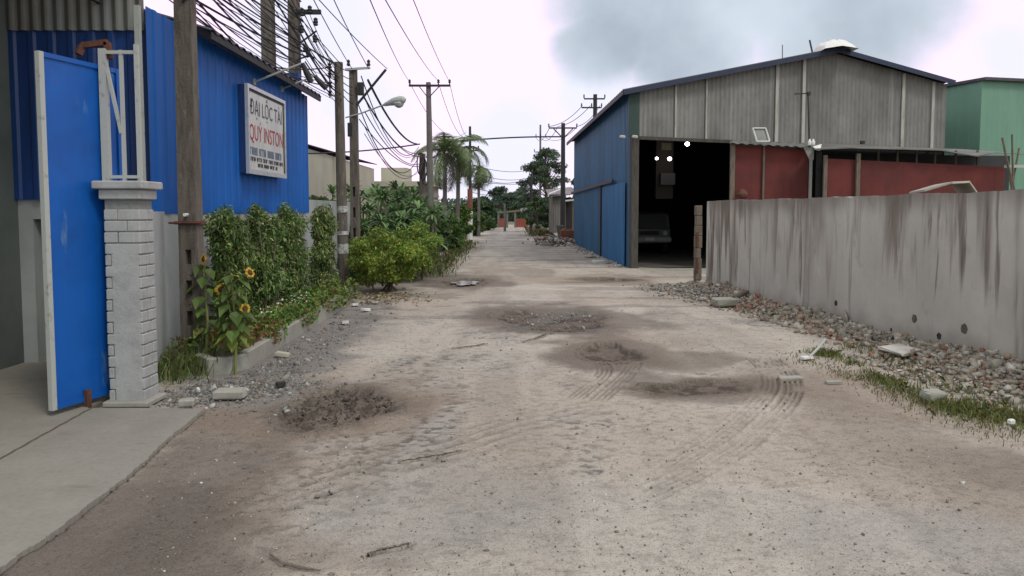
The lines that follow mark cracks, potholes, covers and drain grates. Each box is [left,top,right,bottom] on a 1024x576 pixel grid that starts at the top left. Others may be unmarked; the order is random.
pothole [628,378,762,398]
pothole [260,384,410,435]
pothole [574,342,652,365]
pothole [485,308,615,334]
